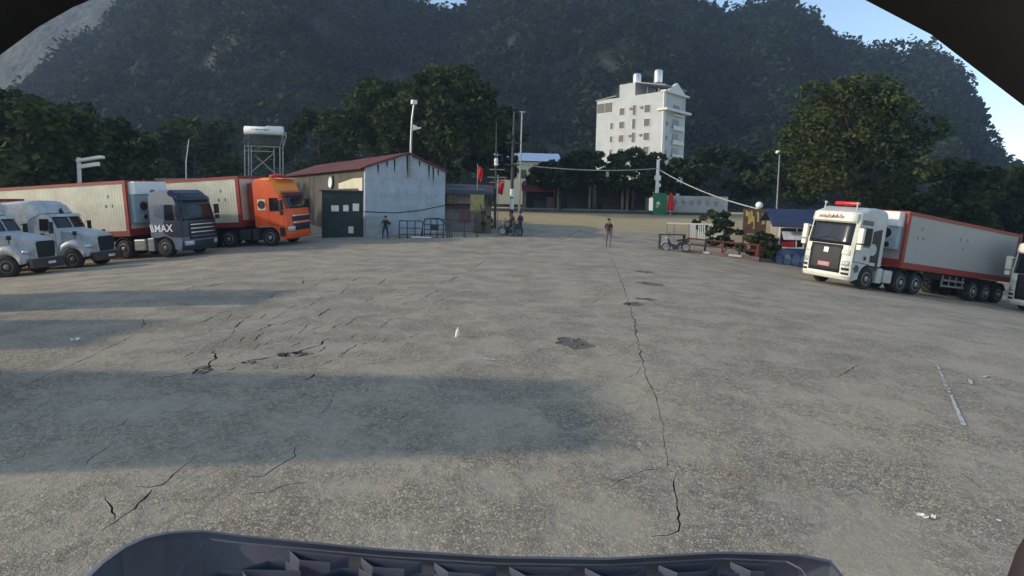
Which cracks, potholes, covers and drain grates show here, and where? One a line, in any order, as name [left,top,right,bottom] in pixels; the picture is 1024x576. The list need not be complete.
crack [650,472,681,537]
crack [101,458,195,531]
crack [160,268,457,381]
pothole [555,337,596,350]
